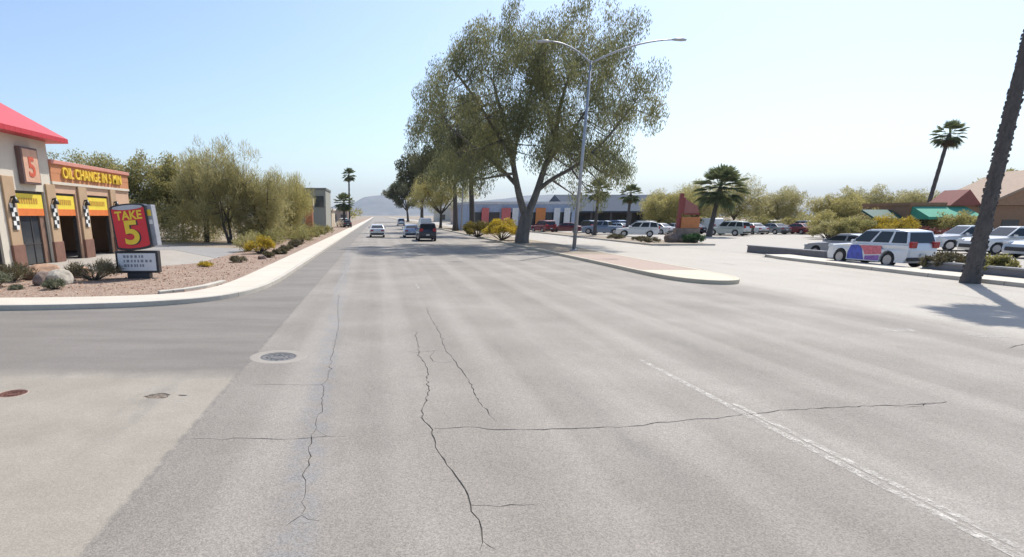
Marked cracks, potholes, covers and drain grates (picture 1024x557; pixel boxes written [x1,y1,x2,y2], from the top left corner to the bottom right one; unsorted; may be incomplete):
crack [197,298,339,526]
manhole cover [250,350,307,364]
crack [402,307,945,549]
manhole cover [0,389,29,398]
